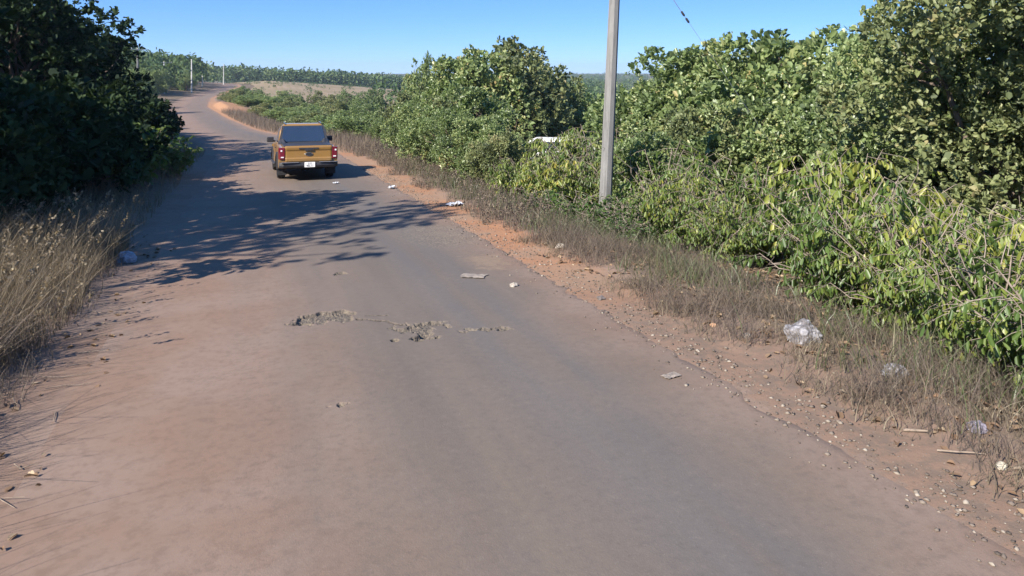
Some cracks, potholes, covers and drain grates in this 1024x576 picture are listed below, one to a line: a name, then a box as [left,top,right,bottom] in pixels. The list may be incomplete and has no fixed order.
pothole [451,324,522,336]
pothole [278,308,363,328]
pothole [382,318,460,345]
